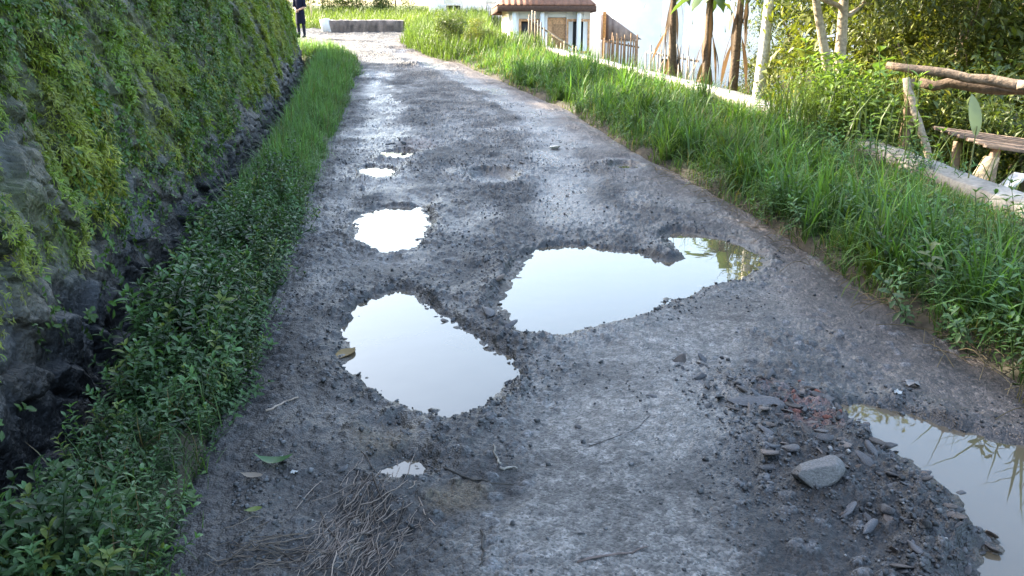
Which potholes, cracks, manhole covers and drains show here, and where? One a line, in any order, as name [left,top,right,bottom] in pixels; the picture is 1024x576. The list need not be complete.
pothole [346,201,437,253]
pothole [826,393,1024,576]
pothole [327,280,528,418]
pothole [483,224,773,335]
pothole [378,146,423,158]
pothole [354,162,399,177]
pothole [461,164,522,183]
